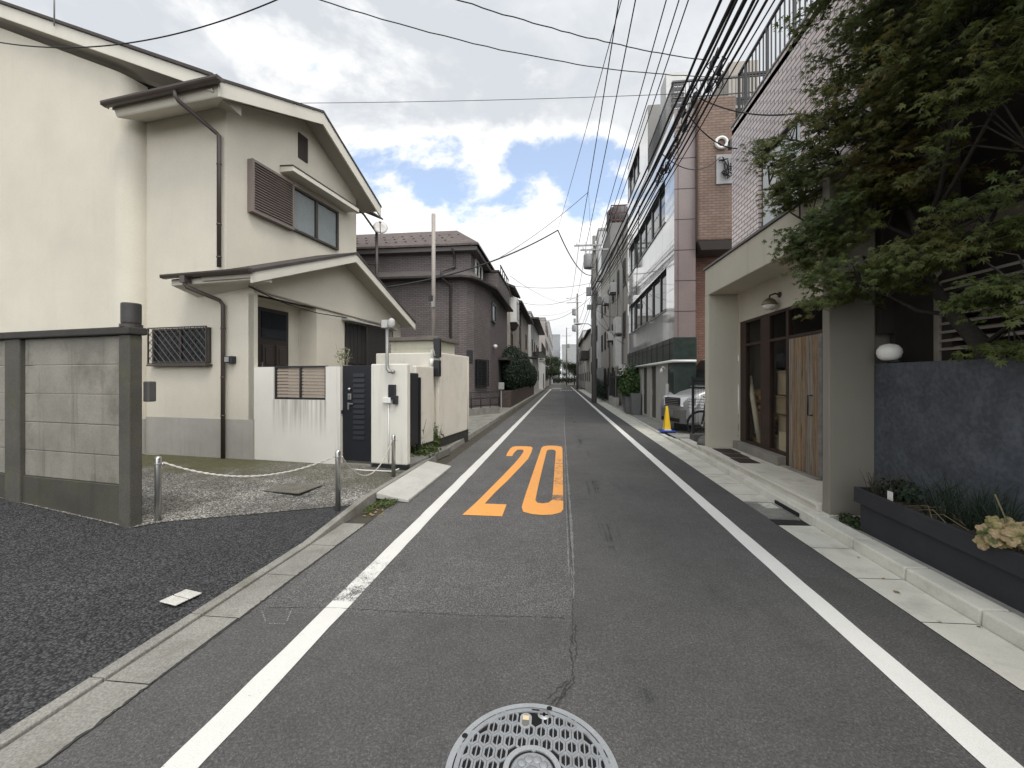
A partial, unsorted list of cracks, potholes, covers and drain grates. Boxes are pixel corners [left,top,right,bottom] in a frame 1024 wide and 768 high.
manhole cover [445,703,618,768]
crack [547,395,578,706]
utility cover [160,589,202,606]
